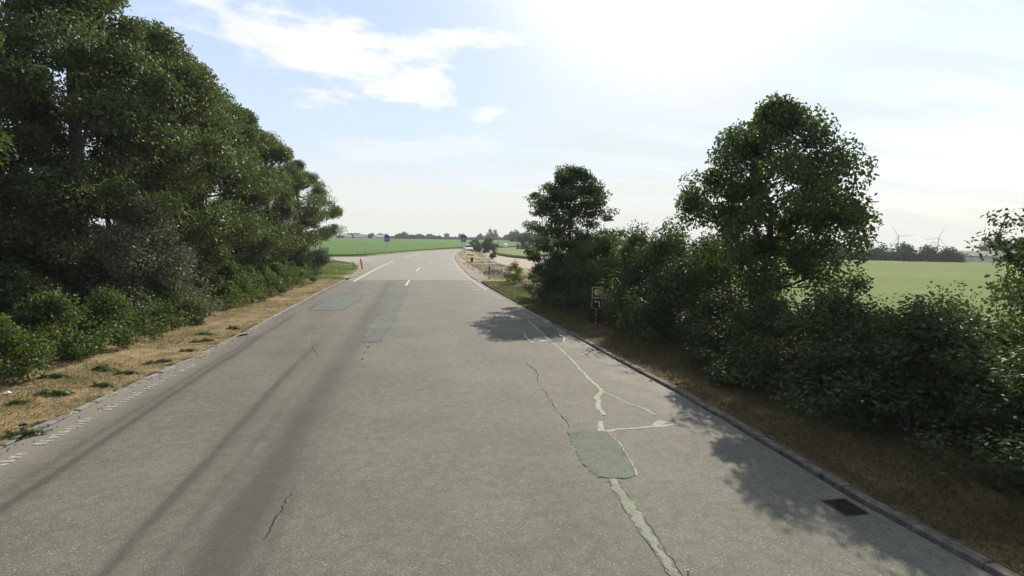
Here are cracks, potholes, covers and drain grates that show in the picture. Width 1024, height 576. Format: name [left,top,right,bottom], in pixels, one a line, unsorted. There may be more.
drain grate [821,498,870,517]
crack [262,477,302,541]
